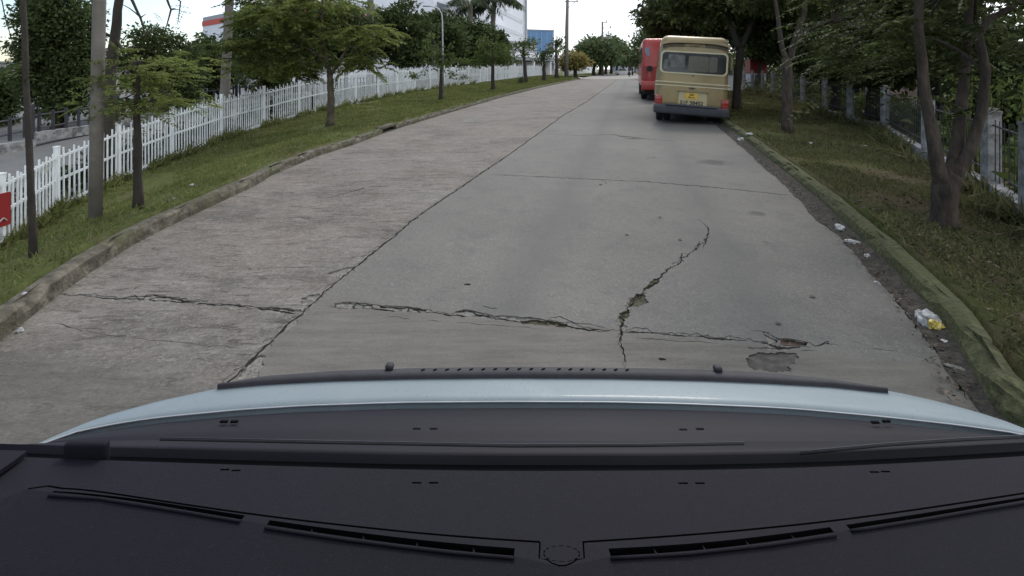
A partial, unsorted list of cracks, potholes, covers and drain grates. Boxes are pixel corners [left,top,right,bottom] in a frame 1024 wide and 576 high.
crack [57,287,303,348]
crack [330,220,893,368]
